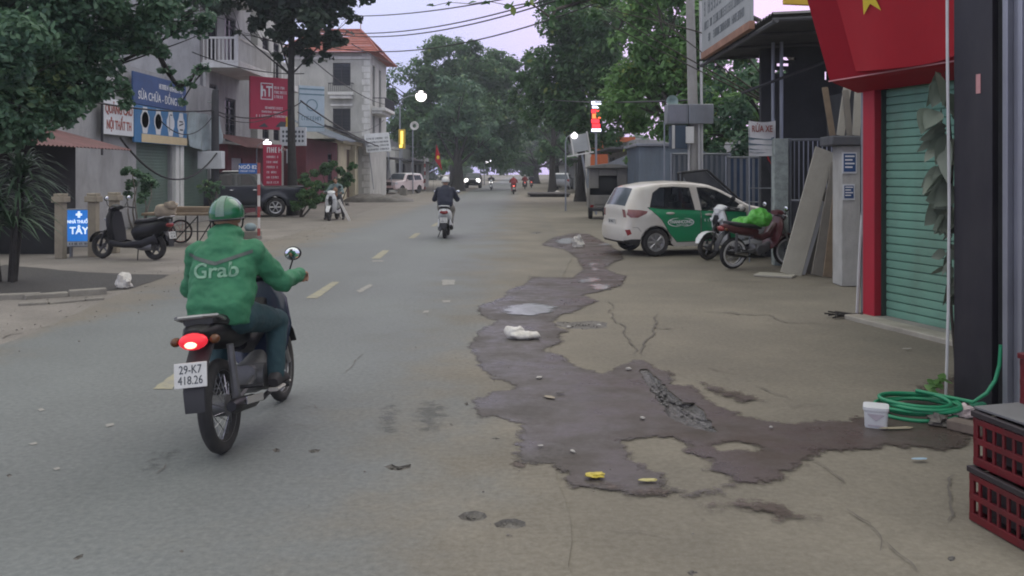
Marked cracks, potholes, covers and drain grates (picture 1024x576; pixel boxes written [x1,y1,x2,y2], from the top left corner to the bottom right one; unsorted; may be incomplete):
crack [849,510,917,570]
pothole [639,370,717,432]
pothole [494,518,526,529]
crack [947,473,955,521]
pothole [458,511,487,521]
crack [608,300,659,357]
